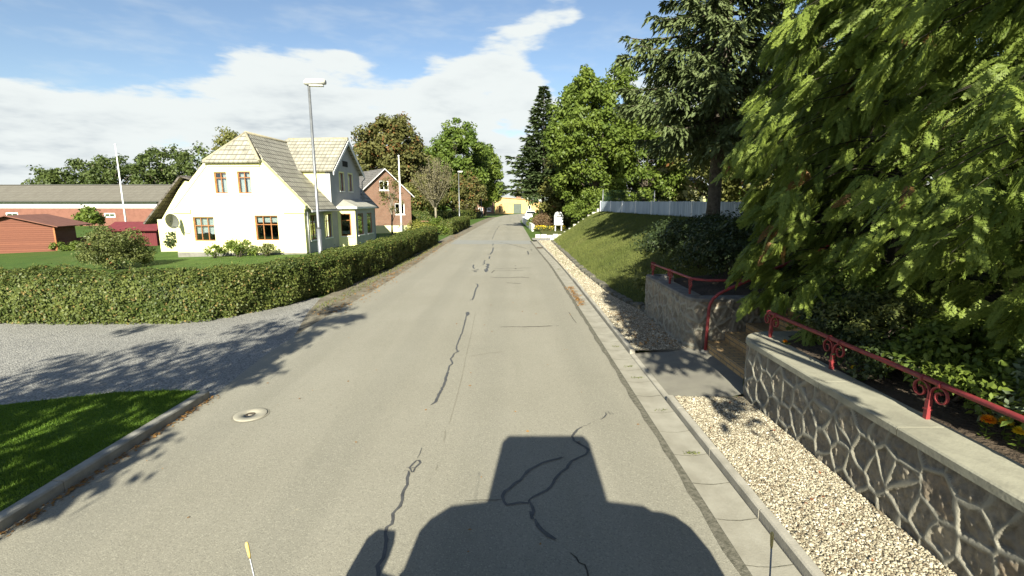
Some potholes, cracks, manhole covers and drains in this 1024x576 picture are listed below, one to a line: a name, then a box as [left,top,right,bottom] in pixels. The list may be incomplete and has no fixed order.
manhole cover [231,407,270,422]
